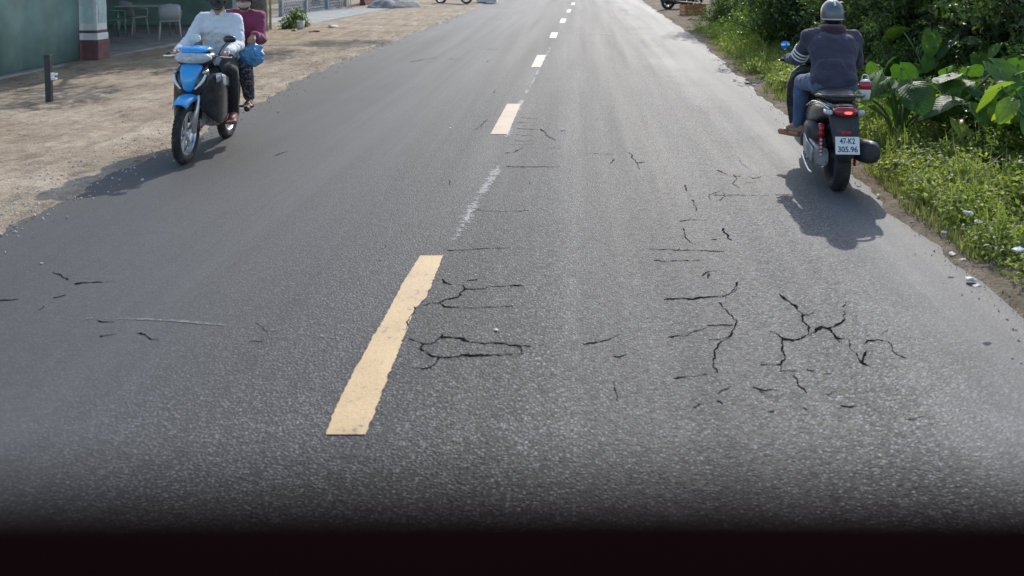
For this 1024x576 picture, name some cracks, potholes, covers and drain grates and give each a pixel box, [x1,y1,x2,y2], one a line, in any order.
crack [654,160,768,408]
crack [754,293,906,411]
crack [39,272,110,310]
crack [505,117,559,167]
crack [405,279,529,369]
